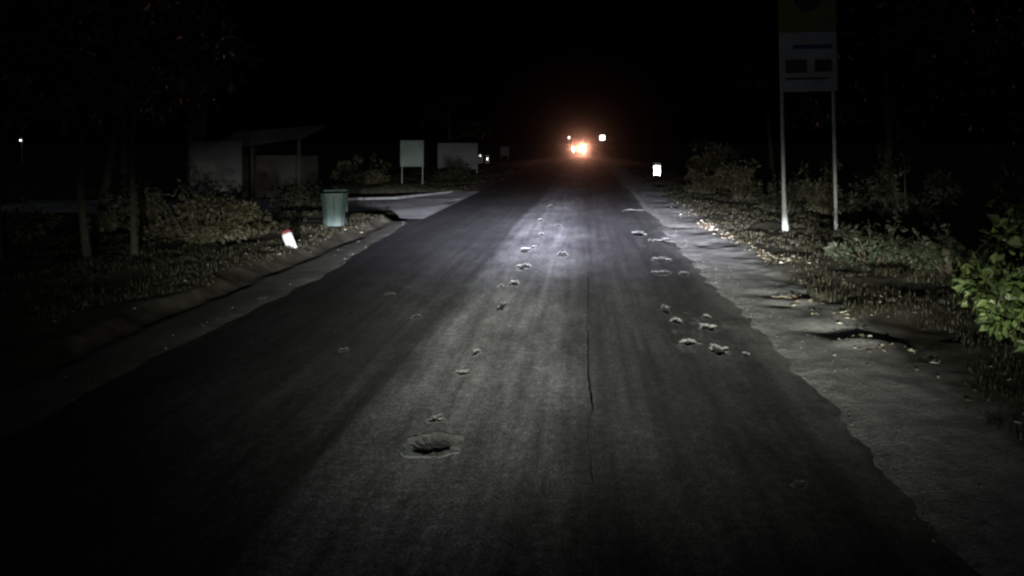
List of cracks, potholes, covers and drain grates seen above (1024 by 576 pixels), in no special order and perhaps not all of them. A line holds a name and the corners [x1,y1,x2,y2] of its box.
pothole [707,343,731,357]
pothole [677,338,702,347]
pothole [400,431,464,459]
crack [586,274,601,506]
pothole [424,412,447,423]
pothole [789,479,809,489]
